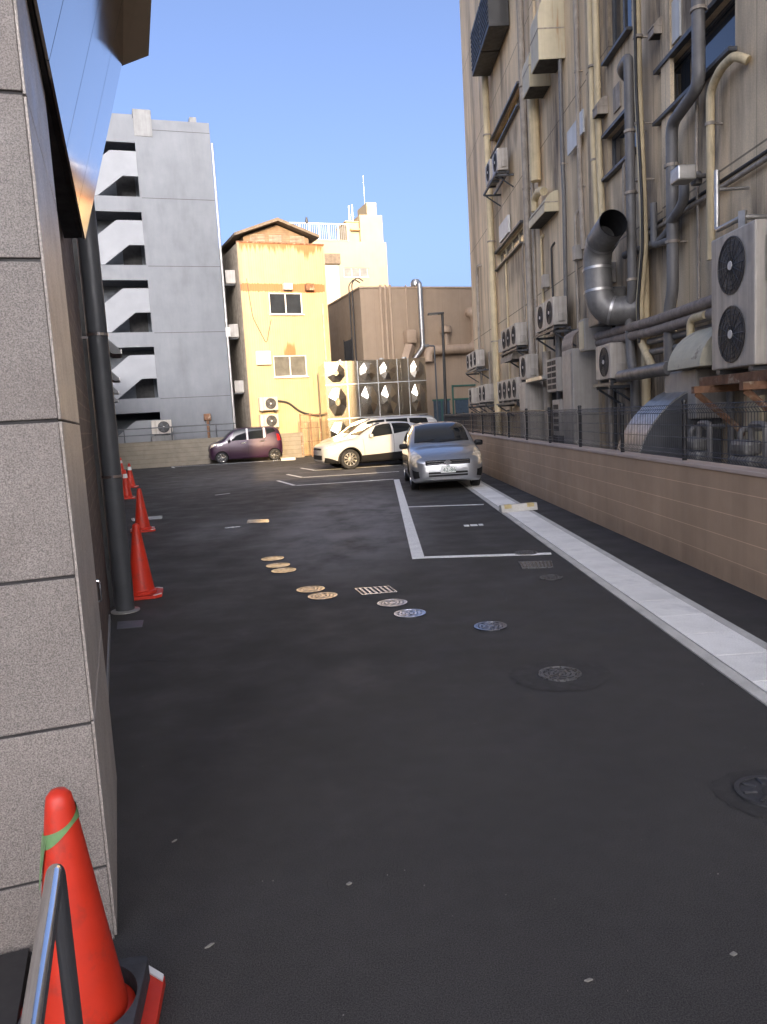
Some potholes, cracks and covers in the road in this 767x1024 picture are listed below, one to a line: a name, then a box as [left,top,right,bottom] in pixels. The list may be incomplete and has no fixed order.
manhole cover [473,621,509,632]
manhole cover [306,592,339,600]
manhole cover [536,666,584,682]
drain grate [518,561,553,569]
drain grate [354,586,397,595]
manhole cover [392,609,427,619]
manhole cover [376,599,409,608]
manhole cover [295,586,326,594]
